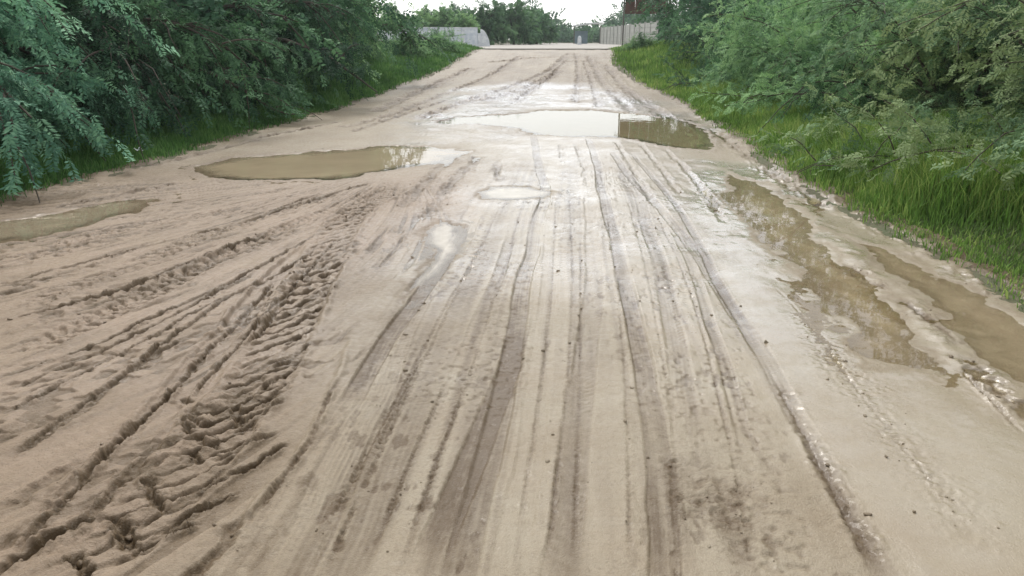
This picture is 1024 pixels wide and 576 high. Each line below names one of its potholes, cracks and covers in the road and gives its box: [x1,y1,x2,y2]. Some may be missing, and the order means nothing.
pothole [841,235,1024,383]
pothole [716,171,937,371]
pothole [0,196,167,243]
pothole [193,144,475,182]
pothole [476,186,557,200]
pothole [434,108,717,150]
